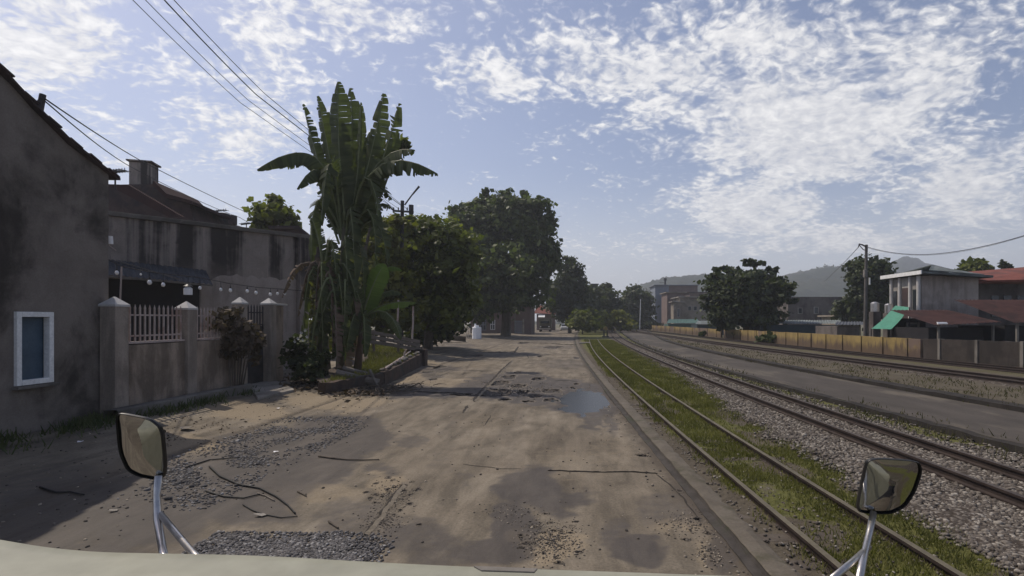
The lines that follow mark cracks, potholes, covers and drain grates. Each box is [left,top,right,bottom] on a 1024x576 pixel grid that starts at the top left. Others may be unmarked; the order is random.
pothole [478,388,517,398]
